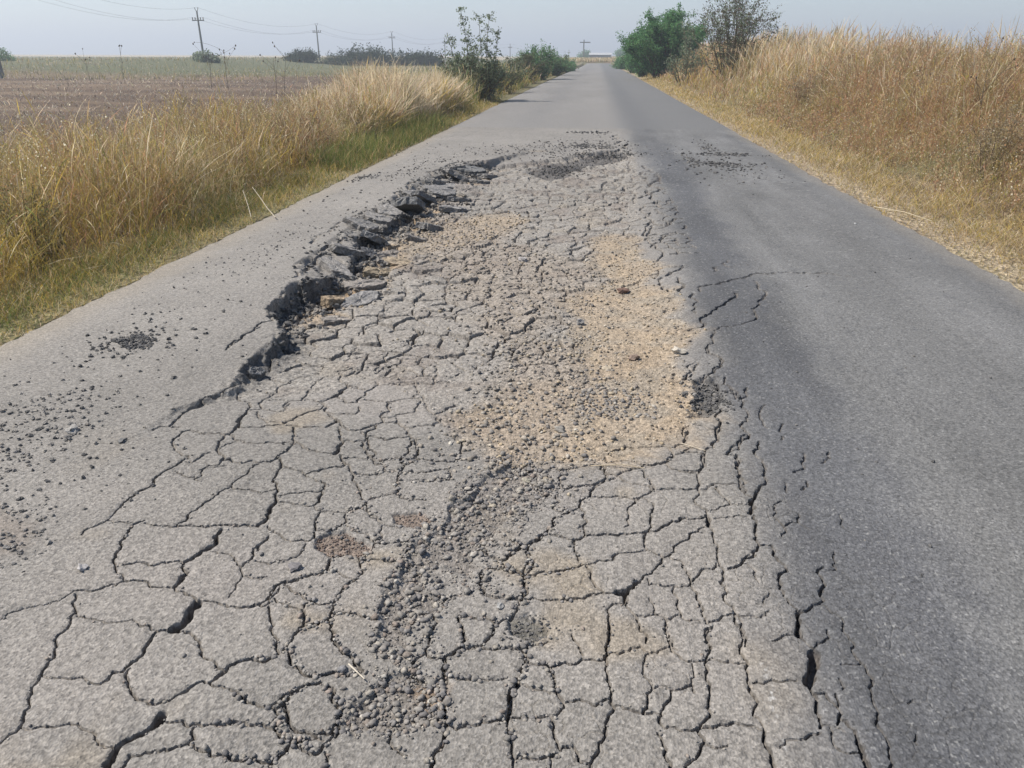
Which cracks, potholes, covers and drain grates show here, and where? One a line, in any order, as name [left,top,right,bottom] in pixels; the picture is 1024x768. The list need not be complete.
crack [0,135,914,768]
pothole [693,380,724,418]
pothole [316,532,372,558]
pothole [218,148,704,479]
